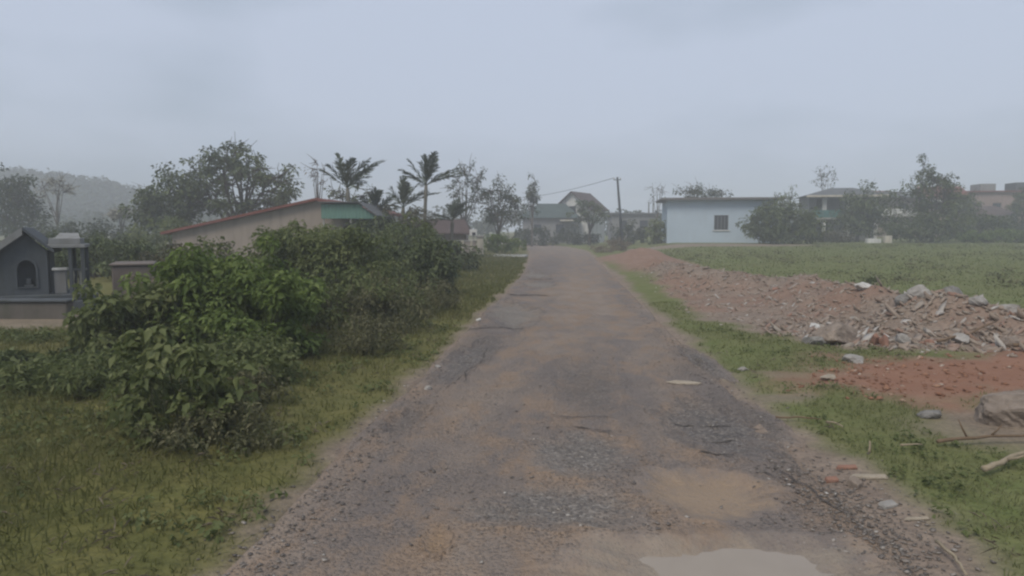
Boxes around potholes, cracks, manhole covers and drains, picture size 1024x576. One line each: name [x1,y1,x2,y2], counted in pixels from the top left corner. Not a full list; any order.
crack [674,423,734,455]
